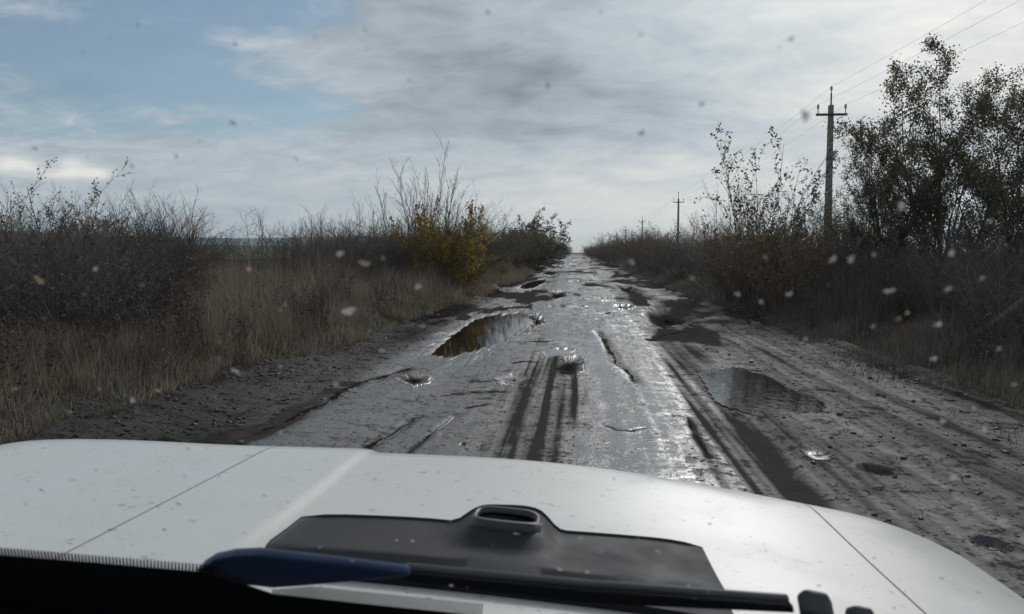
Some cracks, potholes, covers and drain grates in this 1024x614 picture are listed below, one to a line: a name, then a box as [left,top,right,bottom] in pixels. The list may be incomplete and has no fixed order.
pothole [393,373,432,388]
pothole [547,354,586,379]
pothole [524,311,546,331]
pothole [971,534,1015,553]
pothole [696,365,840,417]
pothole [417,309,538,363]
pothole [799,447,838,462]
pothole [856,462,899,476]
pothole [514,278,549,290]
pothole [493,371,534,386]
crack [574,311,693,384]
